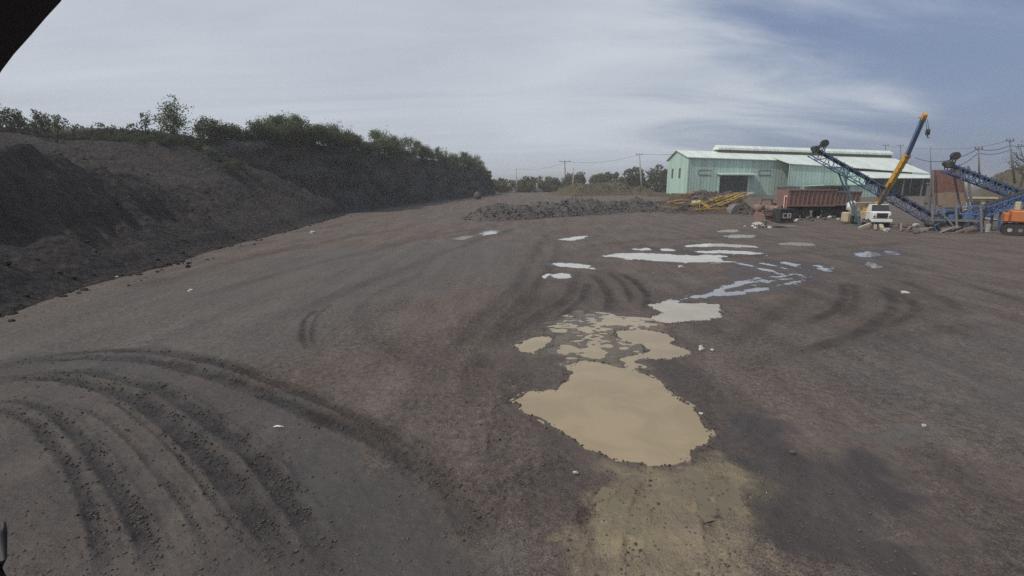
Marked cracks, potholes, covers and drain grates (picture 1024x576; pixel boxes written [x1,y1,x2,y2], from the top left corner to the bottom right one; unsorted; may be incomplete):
pothole [611,328,693,360]
pothole [648,301,726,323]
pothole [508,359,719,468]
pothole [513,334,555,354]
